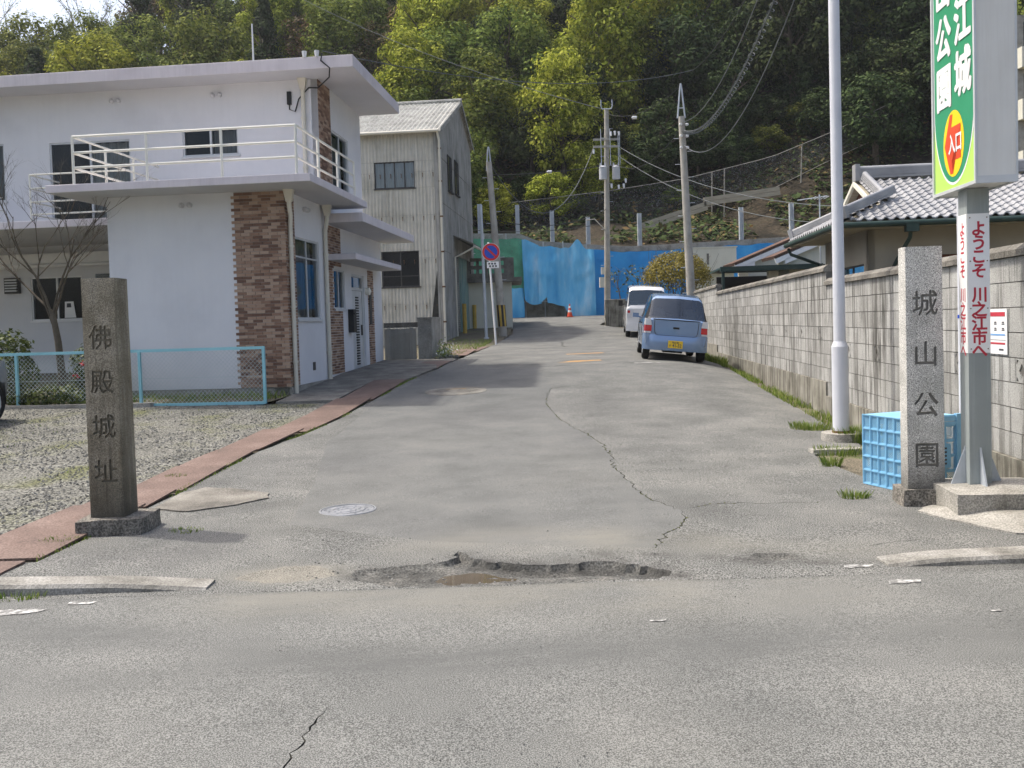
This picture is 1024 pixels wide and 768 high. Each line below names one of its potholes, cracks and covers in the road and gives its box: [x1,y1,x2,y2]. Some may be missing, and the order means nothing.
crack [283,708,327,768]
manhole cover [319,504,376,516]
manhole cover [425,387,487,396]
pothole [351,551,673,588]
crack [545,387,818,548]
